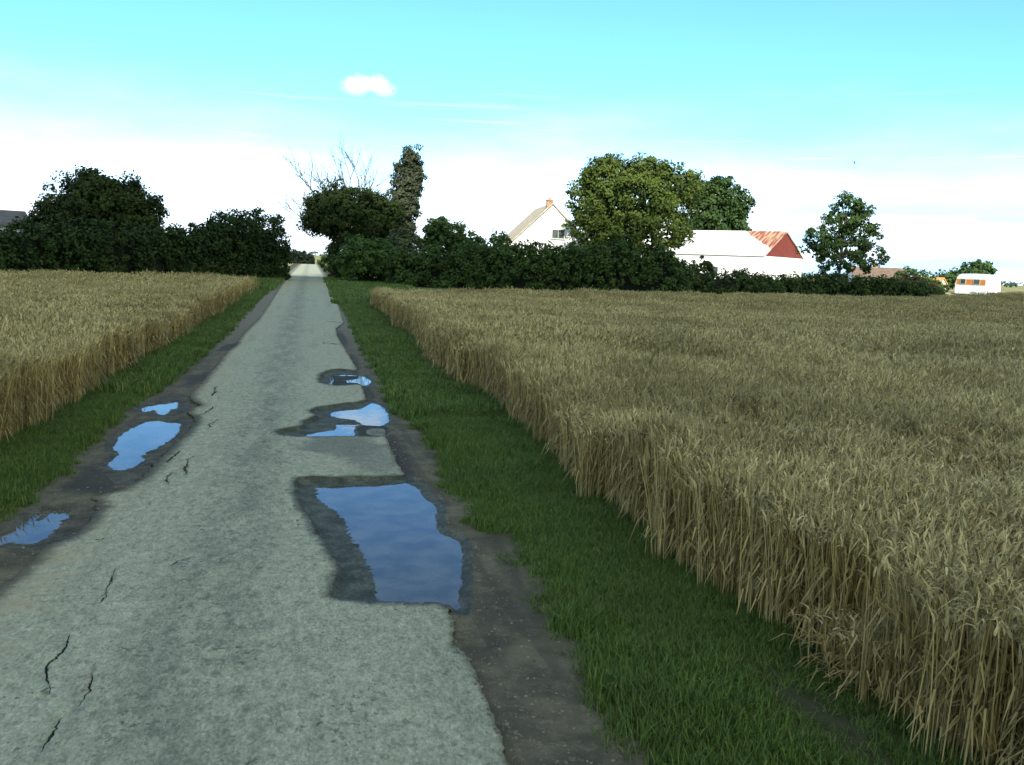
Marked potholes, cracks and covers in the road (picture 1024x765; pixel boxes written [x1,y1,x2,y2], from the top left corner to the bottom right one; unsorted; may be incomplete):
pothole [0,505,99,548]
pothole [277,400,395,436]
crack [42,721,60,751]
pothole [133,398,193,416]
pothole [319,369,376,387]
pothole [294,476,475,616]
crack [45,637,93,705]
pothole [96,418,194,485]
